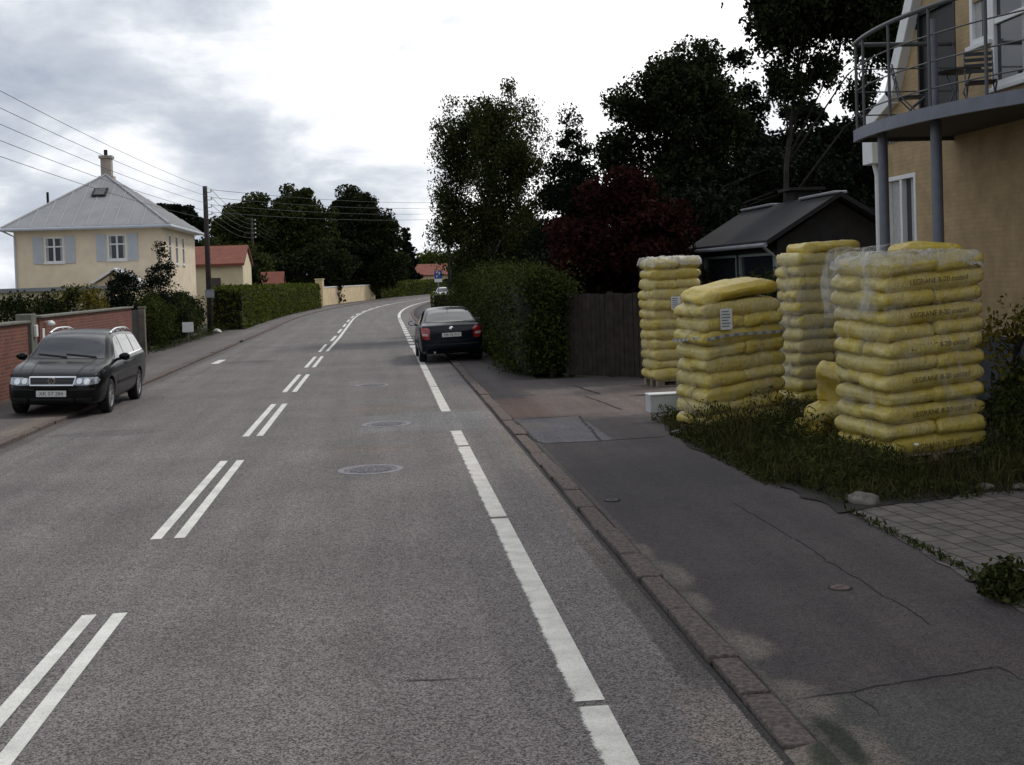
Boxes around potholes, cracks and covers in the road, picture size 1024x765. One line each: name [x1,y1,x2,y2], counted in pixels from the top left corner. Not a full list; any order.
manhole cover [337,464,404,475]
crack [789,665,1020,716]
crack [733,502,932,626]
